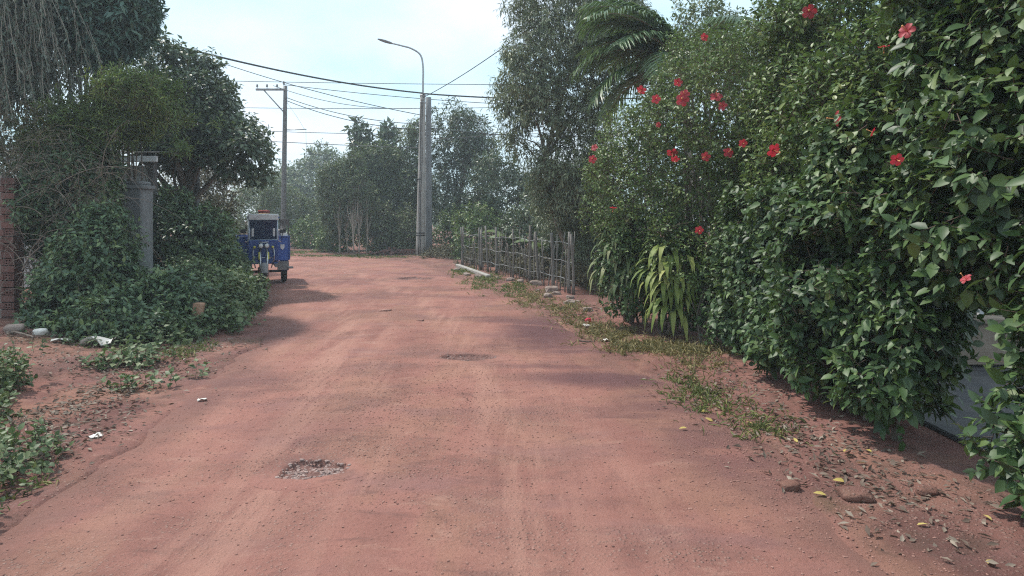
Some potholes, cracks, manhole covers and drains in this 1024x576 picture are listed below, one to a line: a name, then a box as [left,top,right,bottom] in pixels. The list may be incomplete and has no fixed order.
pothole [249,450,375,491]
